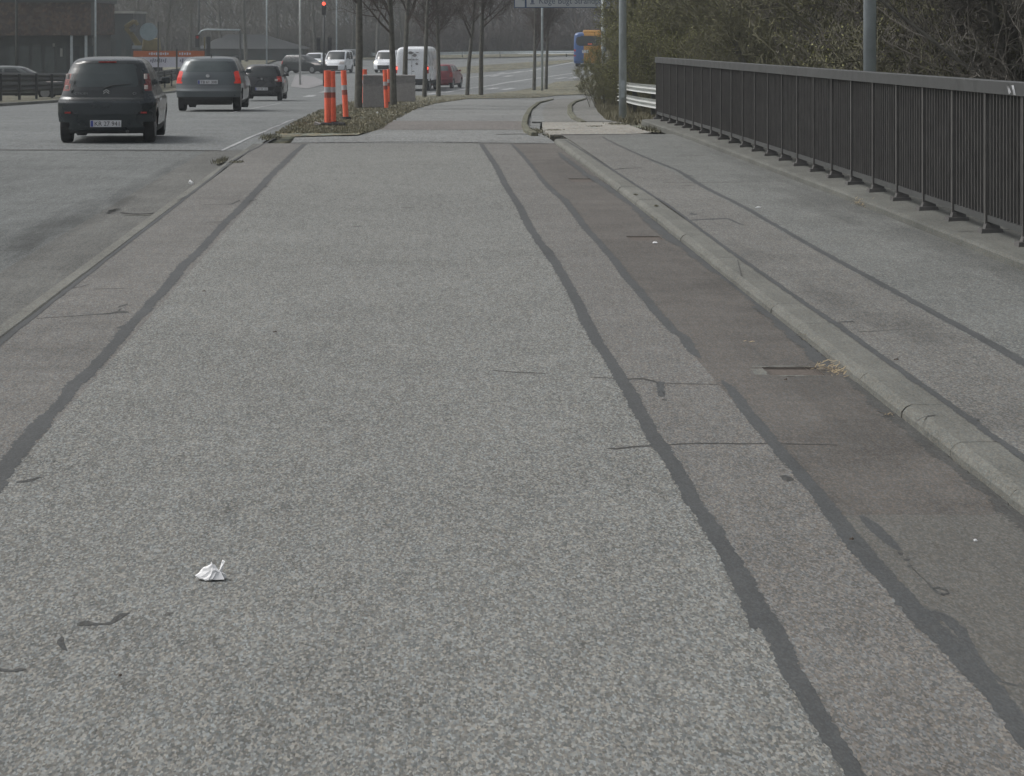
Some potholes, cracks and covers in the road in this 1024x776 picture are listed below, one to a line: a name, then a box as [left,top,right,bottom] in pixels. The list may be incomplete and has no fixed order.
crack [77,612,130,626]
crack [492,370,700,401]
drain grate [750,365,824,376]
